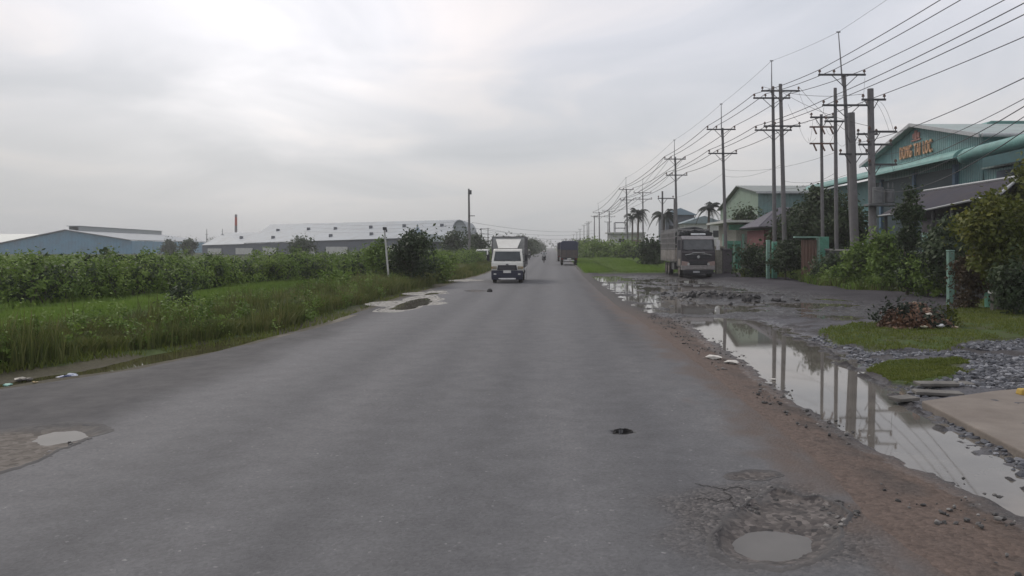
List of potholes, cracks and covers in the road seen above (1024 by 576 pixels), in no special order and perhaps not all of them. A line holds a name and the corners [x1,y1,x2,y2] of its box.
crack [695,483,750,507]
pothole [366,295,446,313]
pothole [0,421,114,474]
pothole [706,486,861,573]
